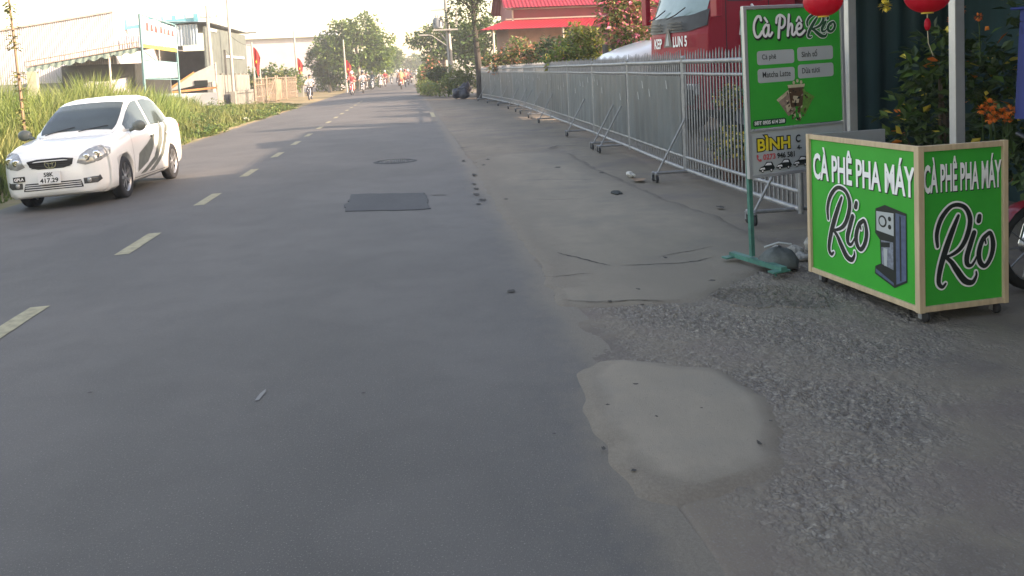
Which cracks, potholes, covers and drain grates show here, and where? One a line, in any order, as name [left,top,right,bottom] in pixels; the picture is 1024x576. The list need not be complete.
crack [638,247,711,265]
